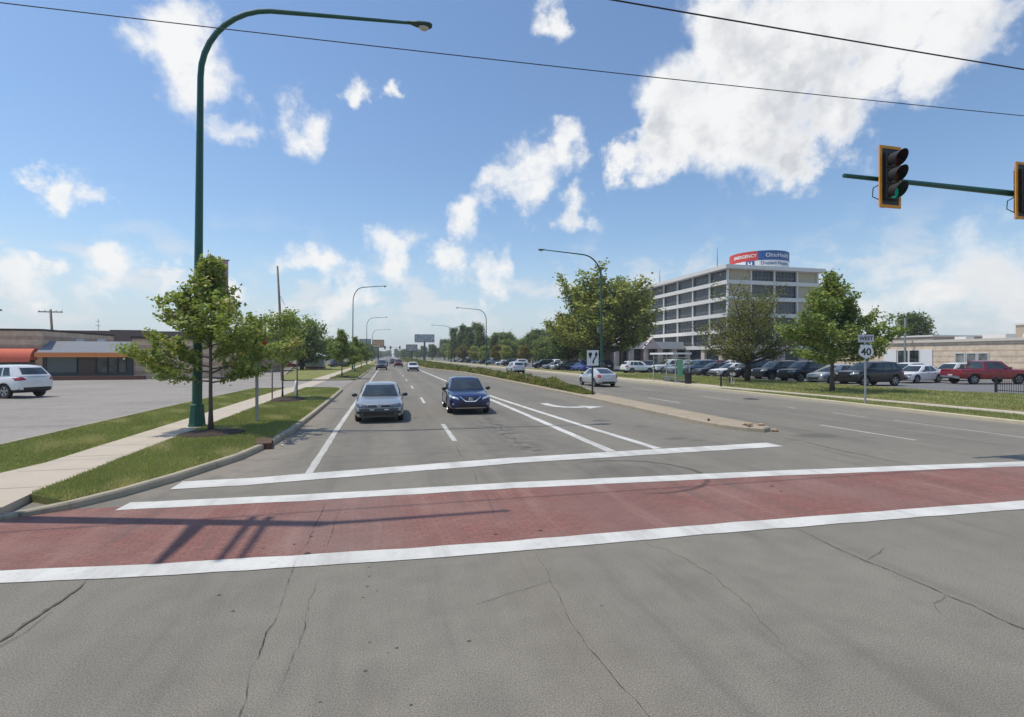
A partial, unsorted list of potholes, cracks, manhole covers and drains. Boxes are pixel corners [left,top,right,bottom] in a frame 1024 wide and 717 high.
crack [239,507,338,716]
crack [803,531,1024,629]
crack [0,583,84,646]
